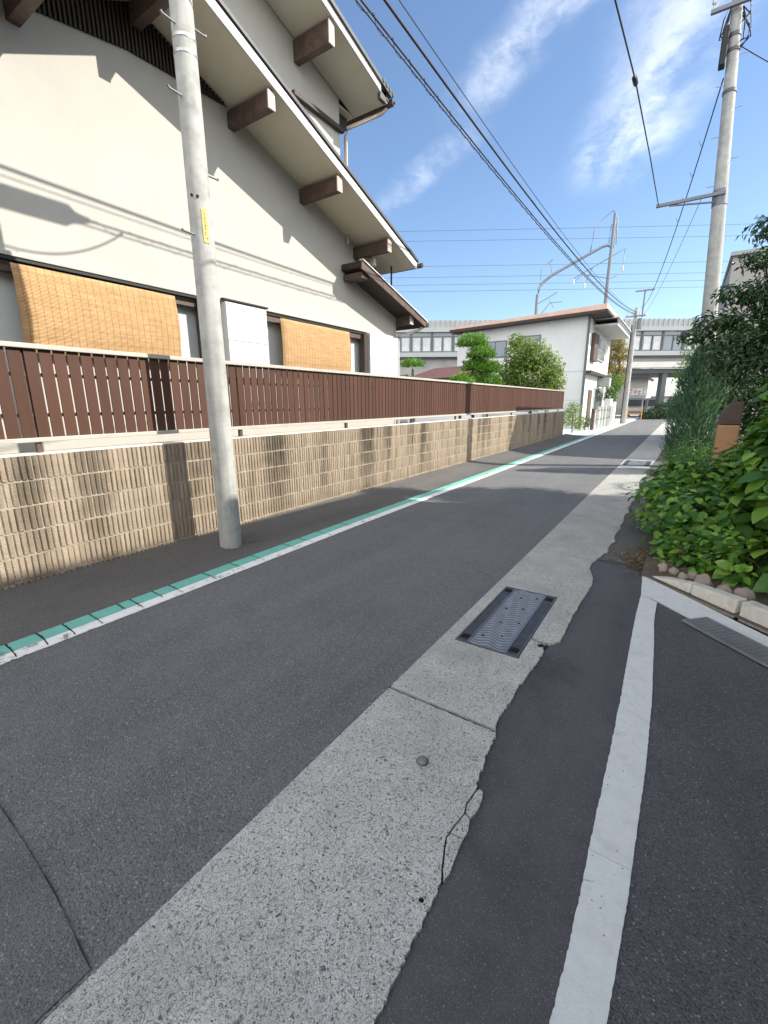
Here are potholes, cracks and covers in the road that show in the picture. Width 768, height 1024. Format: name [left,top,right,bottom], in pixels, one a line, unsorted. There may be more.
manhole cover [455,586,557,659]
crack [441,789,478,884]
drain grate [681,616,768,668]
